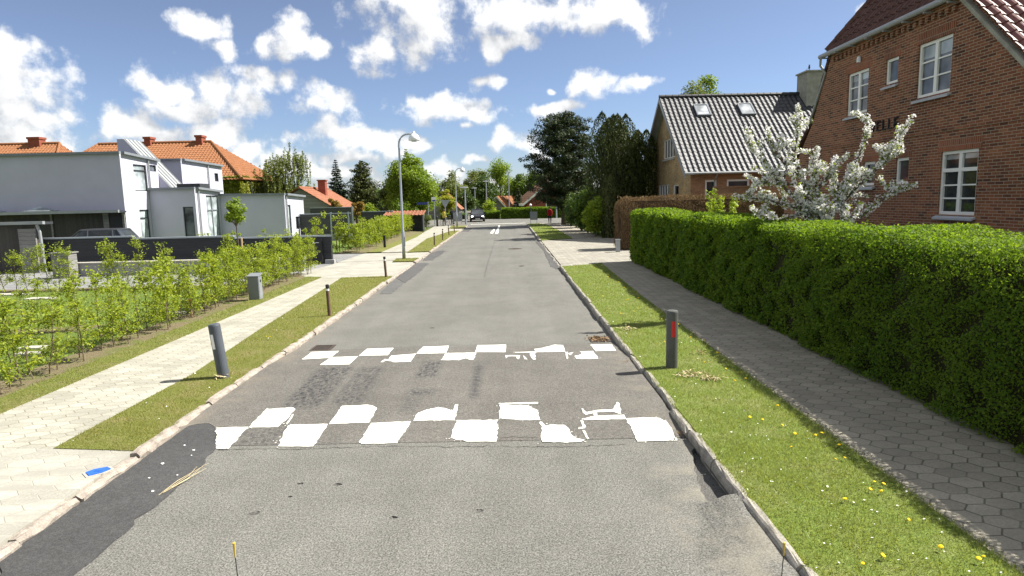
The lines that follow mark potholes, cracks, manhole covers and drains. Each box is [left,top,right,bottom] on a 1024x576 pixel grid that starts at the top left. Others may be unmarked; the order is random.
drain grate [585,335,612,343]
pothole [692,448,729,501]
